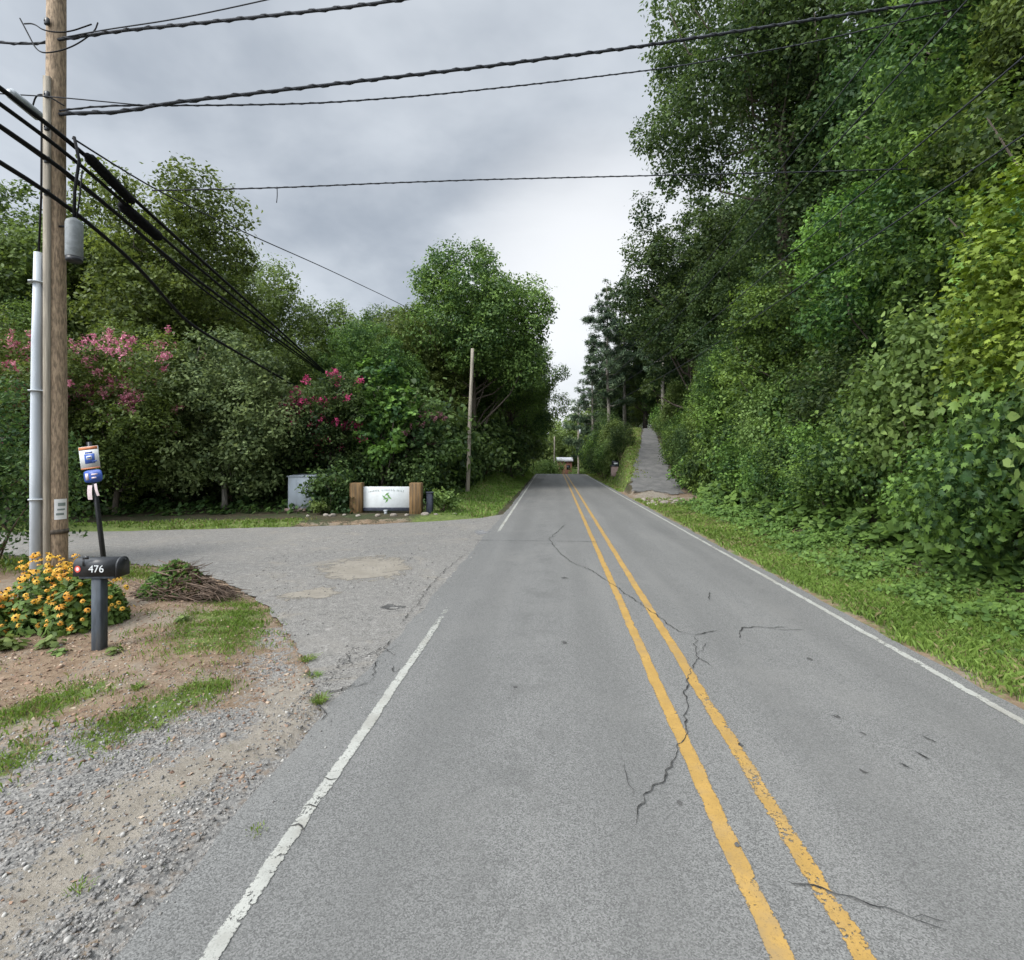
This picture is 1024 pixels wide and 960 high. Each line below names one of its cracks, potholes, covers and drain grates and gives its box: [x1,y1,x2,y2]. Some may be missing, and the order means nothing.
crack [549,526,711,829]
crack [739,626,805,638]
crack [317,641,398,719]
crack [786,880,947,930]
